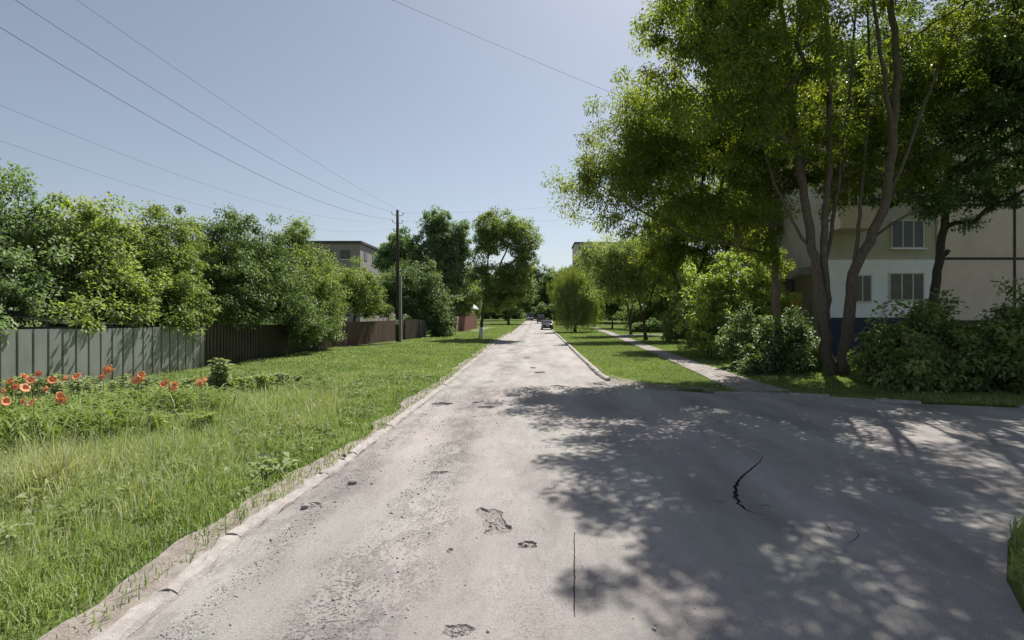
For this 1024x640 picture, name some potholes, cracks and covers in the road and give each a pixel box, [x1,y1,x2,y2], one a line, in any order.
pothole [475,507,513,536]
pothole [441,624,476,639]
crack [712,447,769,516]
